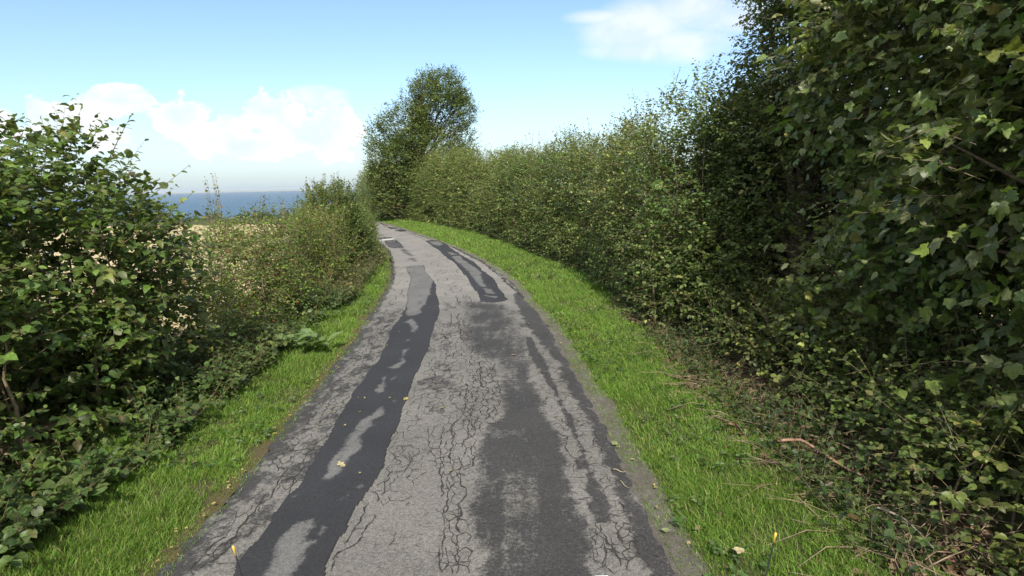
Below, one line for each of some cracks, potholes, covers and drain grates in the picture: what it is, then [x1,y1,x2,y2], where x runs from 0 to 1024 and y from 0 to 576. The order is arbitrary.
crack [185,302,397,575]
crack [529,342,661,576]
crack [410,244,507,573]
